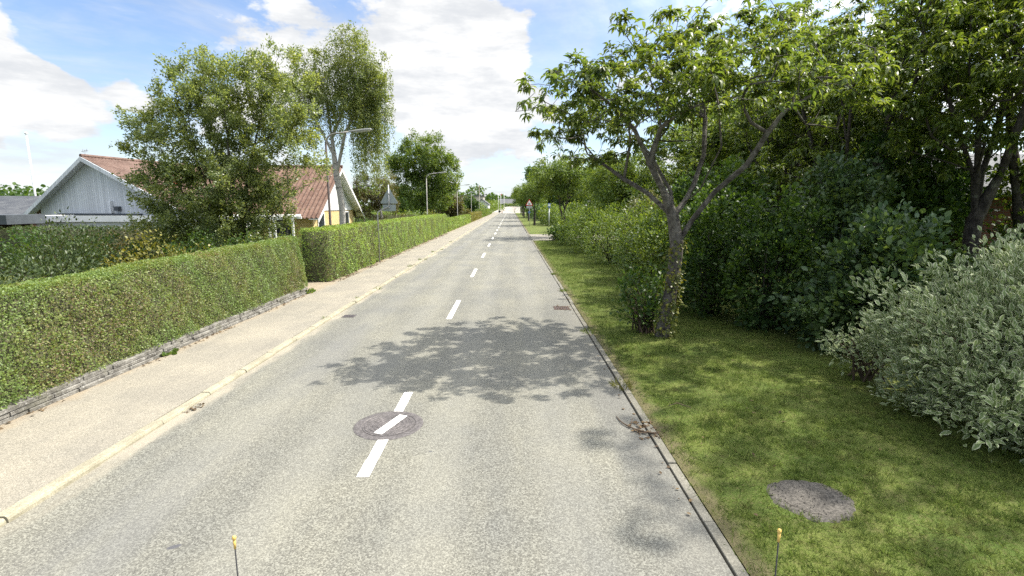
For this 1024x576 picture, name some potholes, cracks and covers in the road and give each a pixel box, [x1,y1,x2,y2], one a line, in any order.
manhole cover [353,411,423,440]
